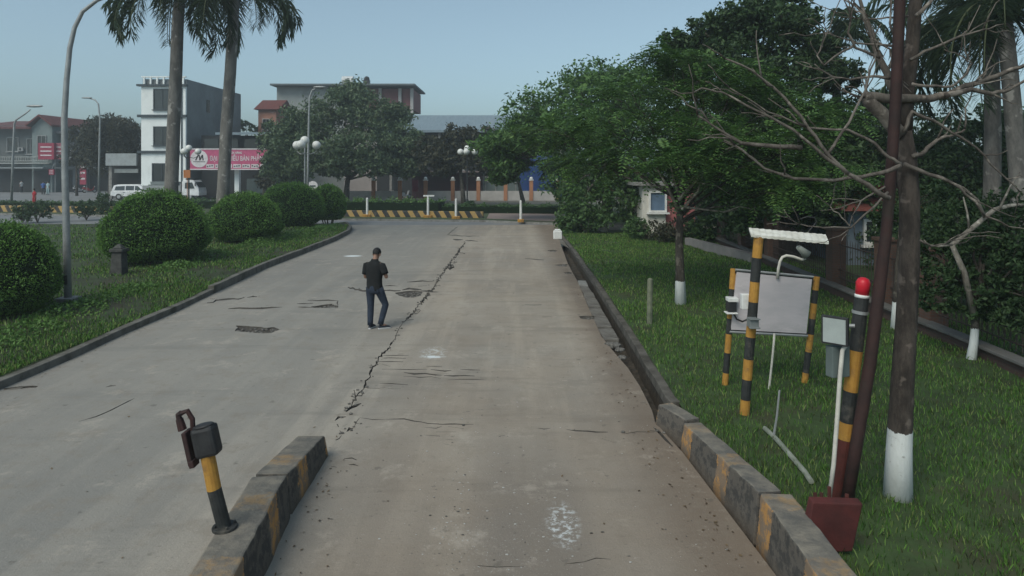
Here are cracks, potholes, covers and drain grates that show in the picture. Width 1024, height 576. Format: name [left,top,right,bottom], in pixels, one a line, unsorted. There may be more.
crack [78,385,133,422]
crack [297,234,673,447]
